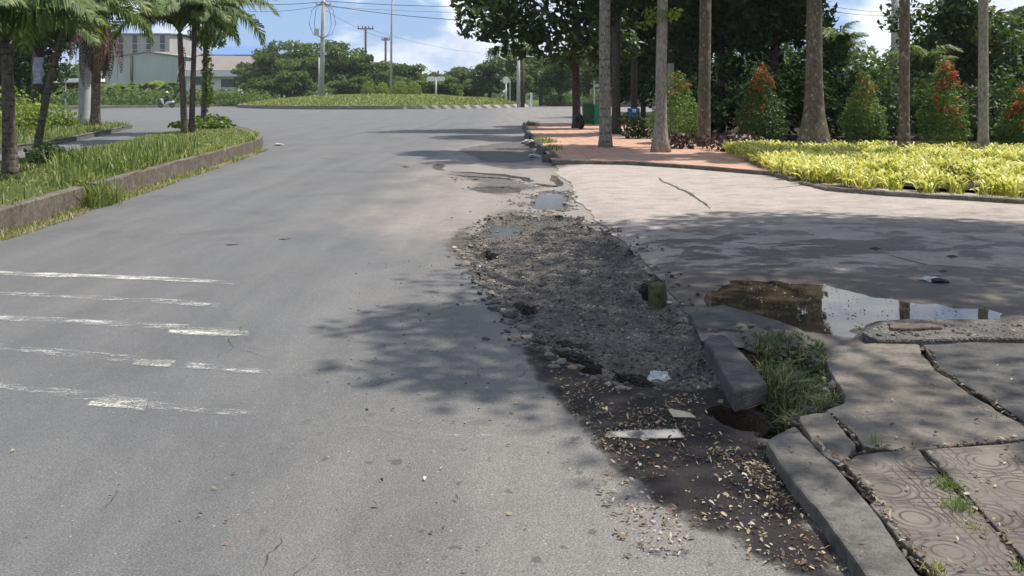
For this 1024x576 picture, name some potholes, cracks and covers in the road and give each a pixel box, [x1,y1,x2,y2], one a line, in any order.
pothole [464,215,719,390]
pothole [470,186,522,194]
crack [259,538,320,576]
pothole [705,405,770,439]
pothole [526,190,573,207]
